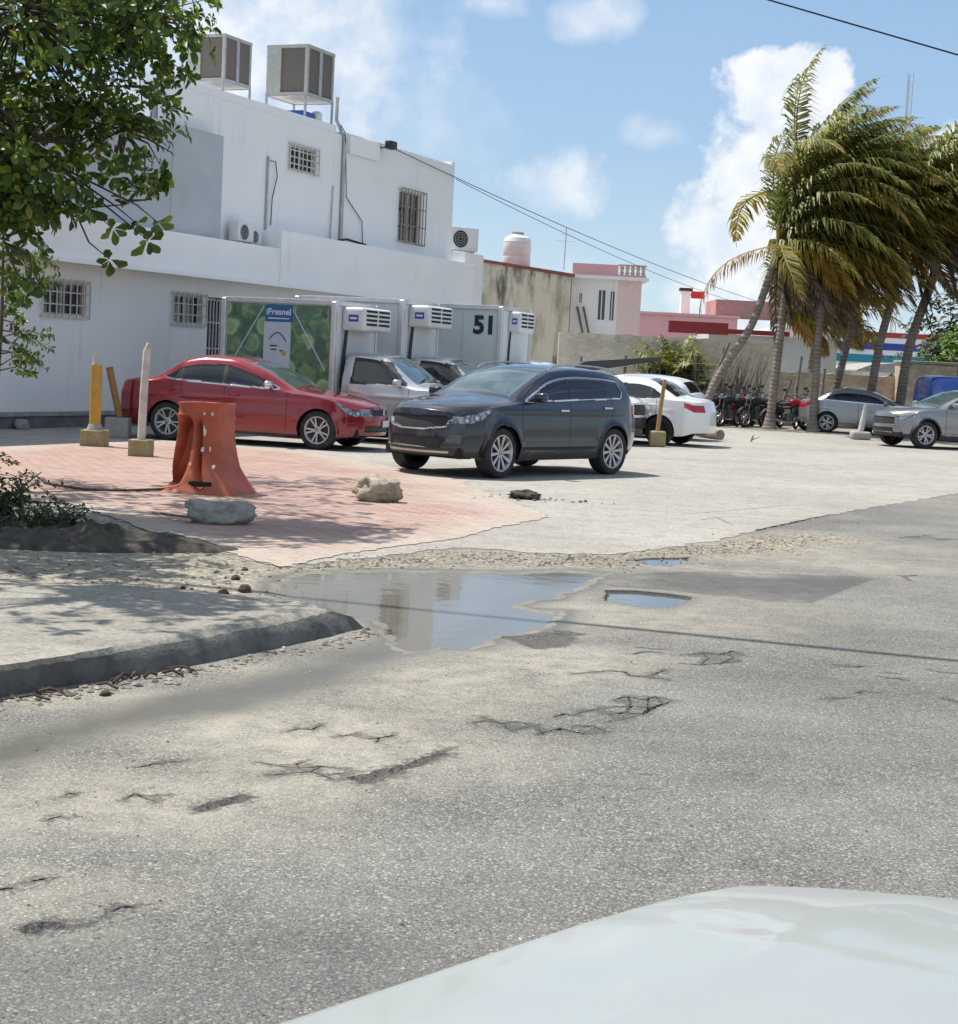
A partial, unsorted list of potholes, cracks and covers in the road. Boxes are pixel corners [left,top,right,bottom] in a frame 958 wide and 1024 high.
crack [575,651,742,680]
crack [473,696,671,735]
crack [259,761,346,780]
pothole [604,590,692,608]
pothole [268,569,613,655]
pothole [634,557,689,566]
